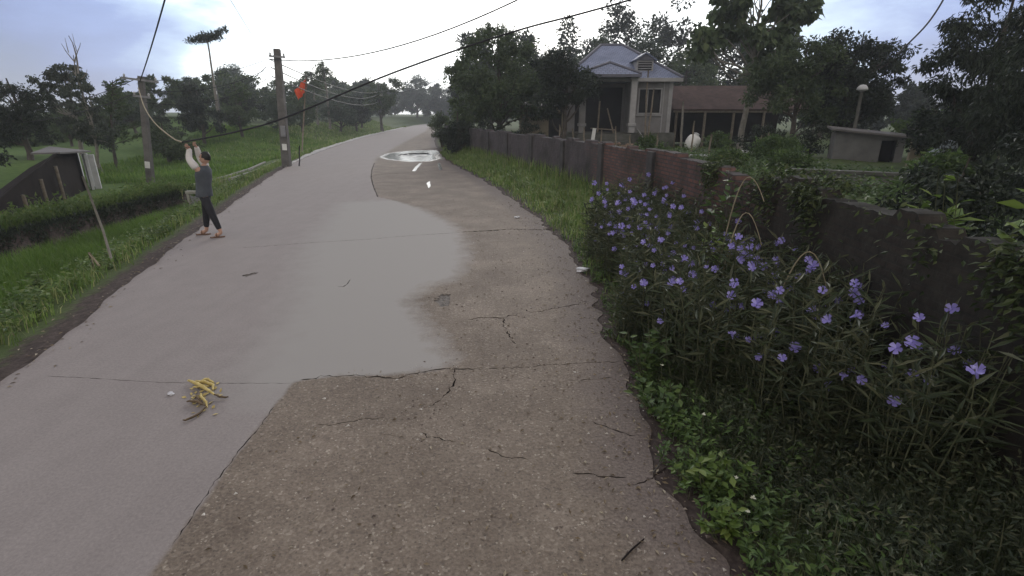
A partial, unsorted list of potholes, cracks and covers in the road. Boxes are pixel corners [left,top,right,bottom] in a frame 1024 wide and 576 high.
crack [470,303,580,343]
pothole [434,294,451,307]
crack [574,468,665,484]
crack [303,368,473,406]
